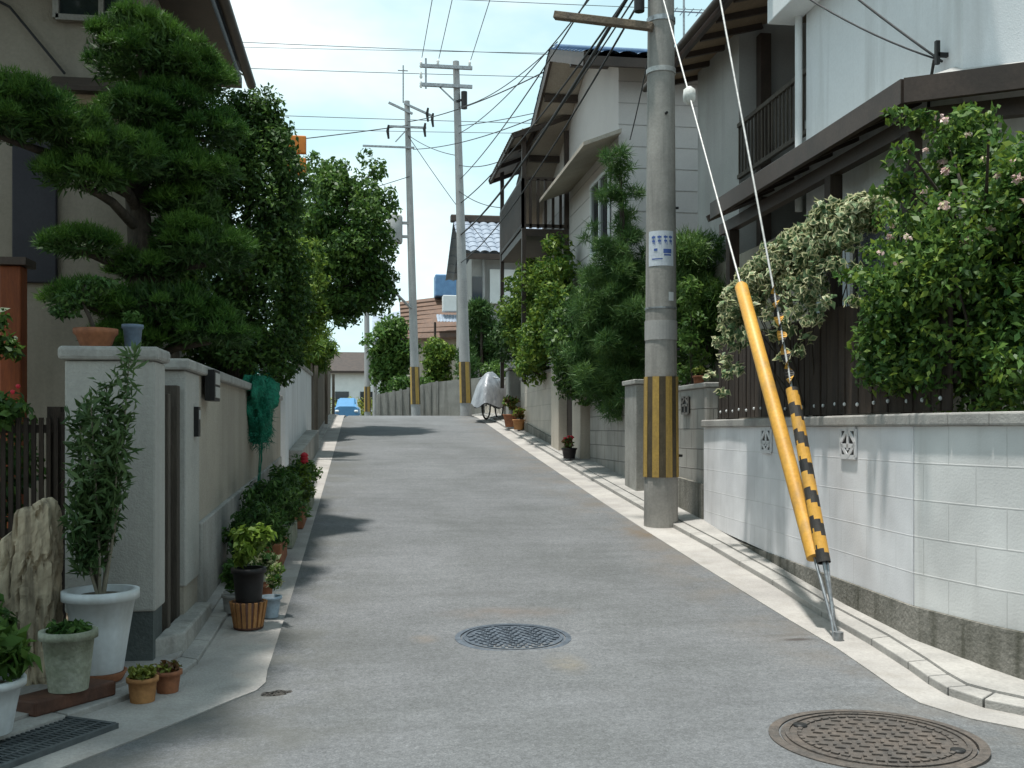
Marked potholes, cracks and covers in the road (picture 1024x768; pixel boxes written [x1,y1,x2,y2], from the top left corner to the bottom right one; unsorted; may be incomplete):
manhole cover [768,709,991,768]
drain grate [0,716,119,768]
manhole cover [455,623,571,651]
